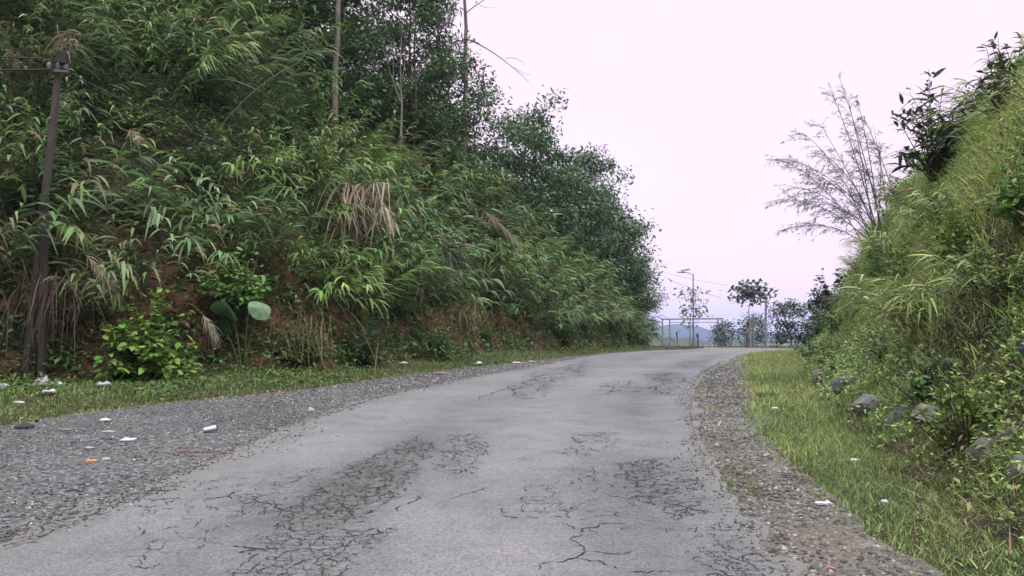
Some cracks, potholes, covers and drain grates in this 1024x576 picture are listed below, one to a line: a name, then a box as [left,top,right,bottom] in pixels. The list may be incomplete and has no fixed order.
crack [0,436,438,576]
crack [560,432,618,456]
crack [479,362,590,399]
crack [500,457,709,573]
crack [600,359,708,404]
crack [433,432,492,499]
